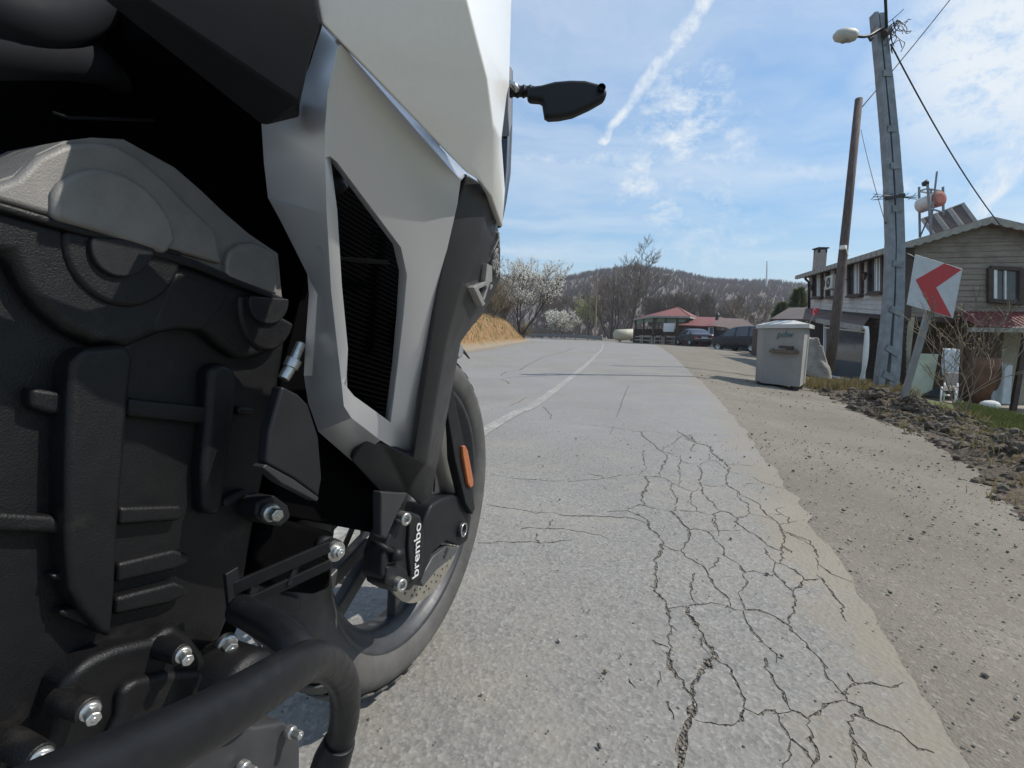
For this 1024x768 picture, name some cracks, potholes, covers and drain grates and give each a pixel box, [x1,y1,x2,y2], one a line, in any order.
crack [496,427,934,768]
